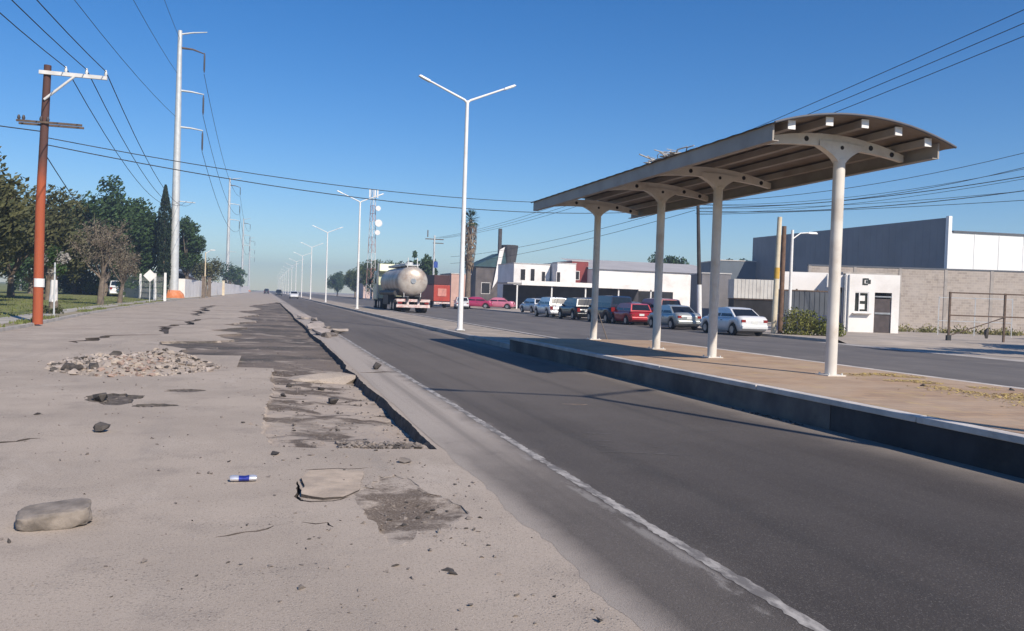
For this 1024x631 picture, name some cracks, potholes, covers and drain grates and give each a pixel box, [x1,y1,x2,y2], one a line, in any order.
crack [218,526,273,537]
pothole [354,474,470,547]
pothole [85,393,144,405]
pothole [159,303,436,449]
